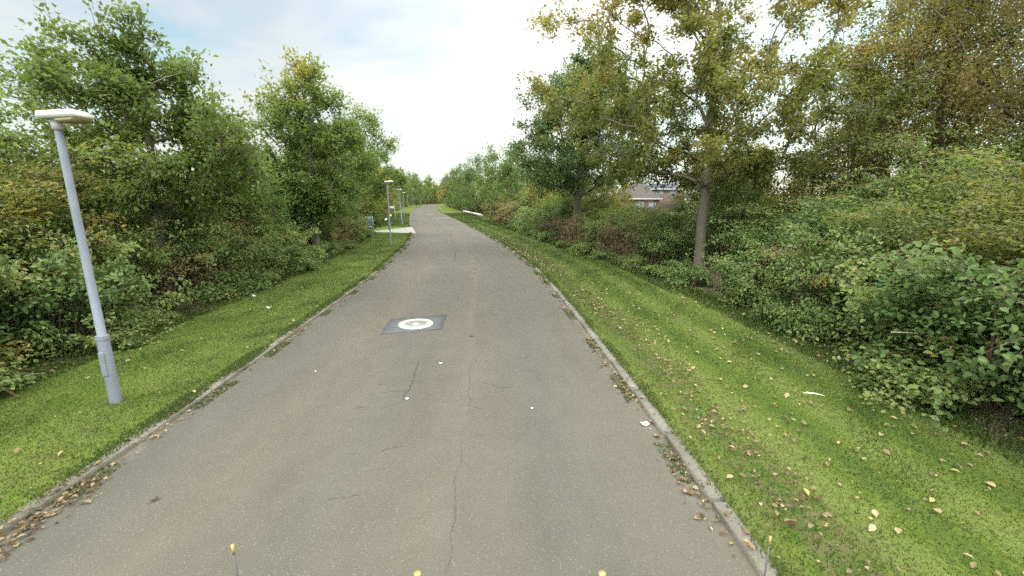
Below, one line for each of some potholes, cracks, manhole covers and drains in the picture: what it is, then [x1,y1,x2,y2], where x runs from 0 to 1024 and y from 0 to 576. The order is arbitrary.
manhole cover [379,315,447,335]
